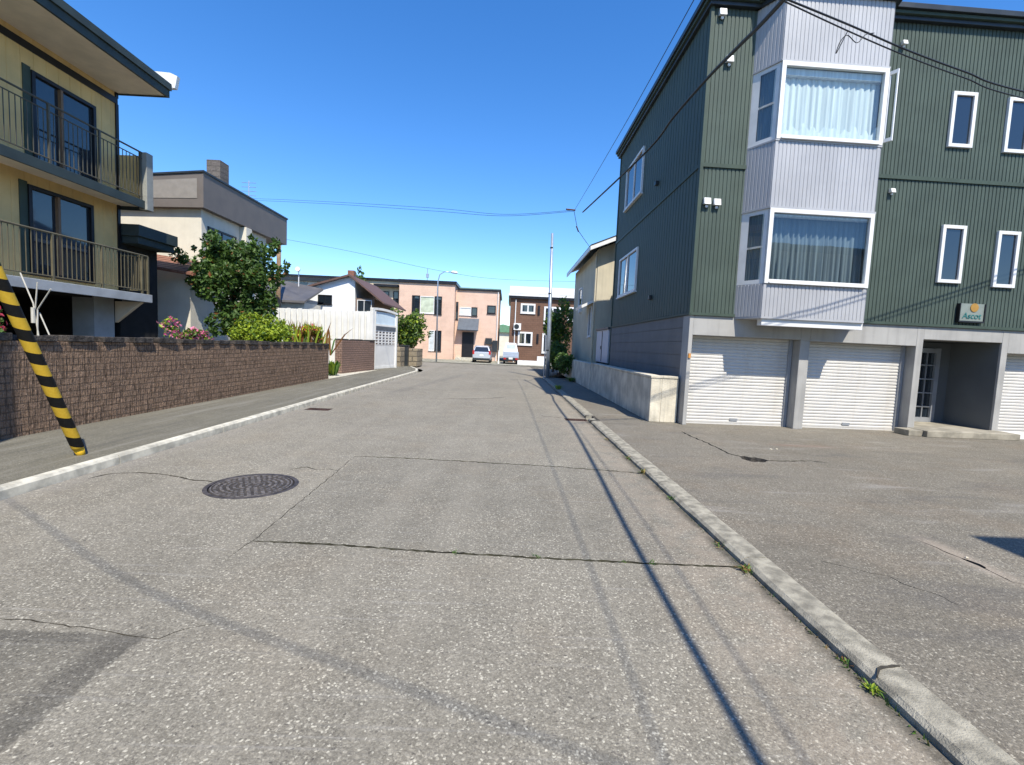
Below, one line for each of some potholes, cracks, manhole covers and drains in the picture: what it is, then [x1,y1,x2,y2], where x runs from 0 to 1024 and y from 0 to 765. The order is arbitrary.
crack [0,618,210,639]
crack [918,540,1020,584]
crack [683,432,826,463]
crack [88,472,213,482]
manhole cover [202,474,299,499]
crack [823,561,958,605]
